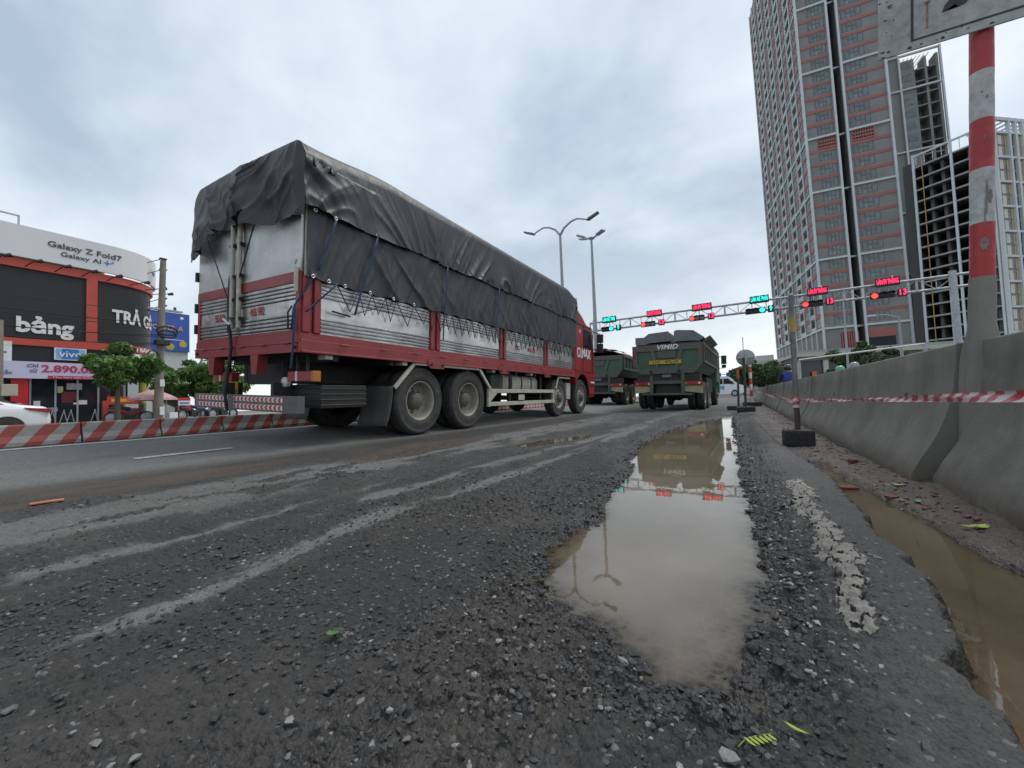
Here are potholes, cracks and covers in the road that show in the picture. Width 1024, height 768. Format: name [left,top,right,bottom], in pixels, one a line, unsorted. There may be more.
crack [785,481,888,633]
pothole [500,412,829,768]
